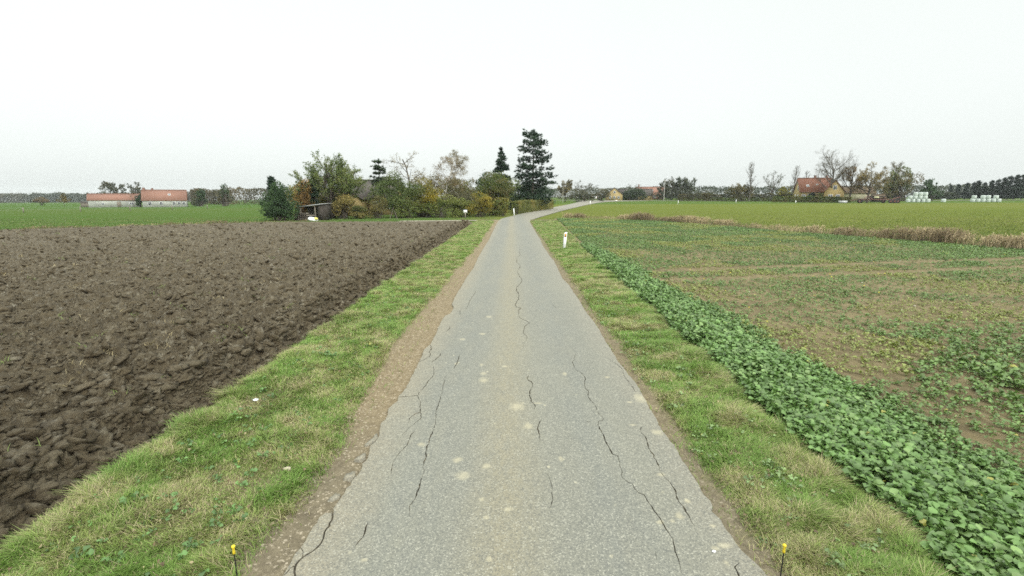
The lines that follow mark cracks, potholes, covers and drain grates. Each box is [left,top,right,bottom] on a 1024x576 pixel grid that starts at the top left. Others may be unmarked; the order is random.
crack [283,509,334,576]
crack [391,327,460,513]
crack [572,358,694,568]
